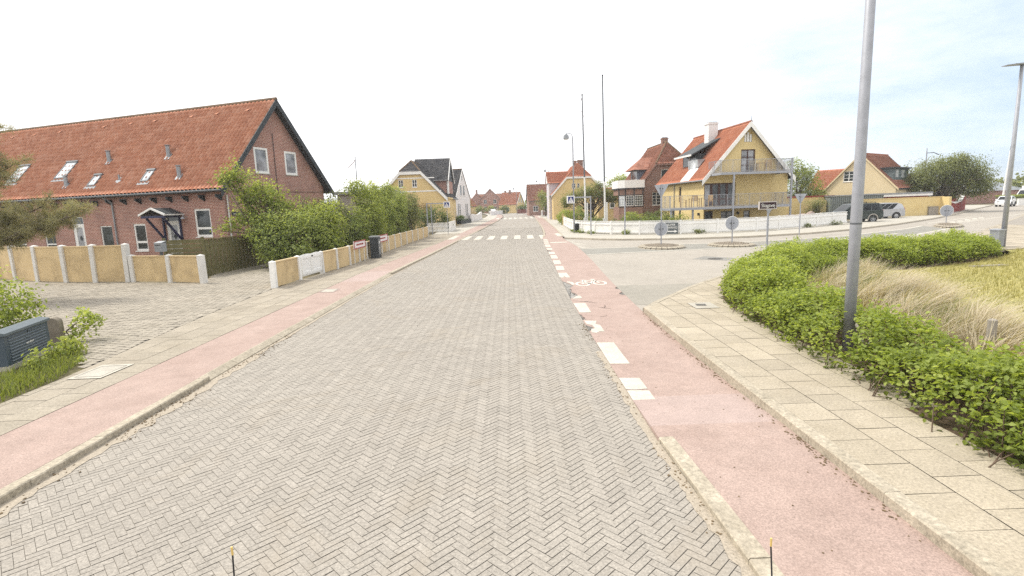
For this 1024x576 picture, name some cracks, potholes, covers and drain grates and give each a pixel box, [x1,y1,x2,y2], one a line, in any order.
manhole cover [68,364,133,379]
